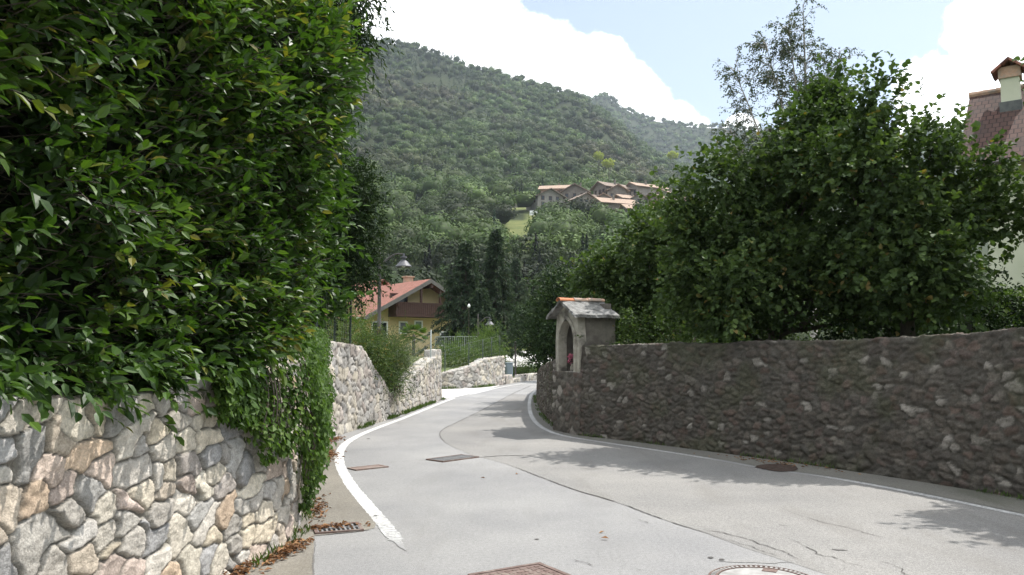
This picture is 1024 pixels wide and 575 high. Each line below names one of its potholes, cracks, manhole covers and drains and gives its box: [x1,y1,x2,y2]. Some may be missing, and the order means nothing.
crack [710,514,887,566]
drain grate [313,522,364,534]
manhole cover [467,562,571,575]
manhole cover [708,565,808,575]
